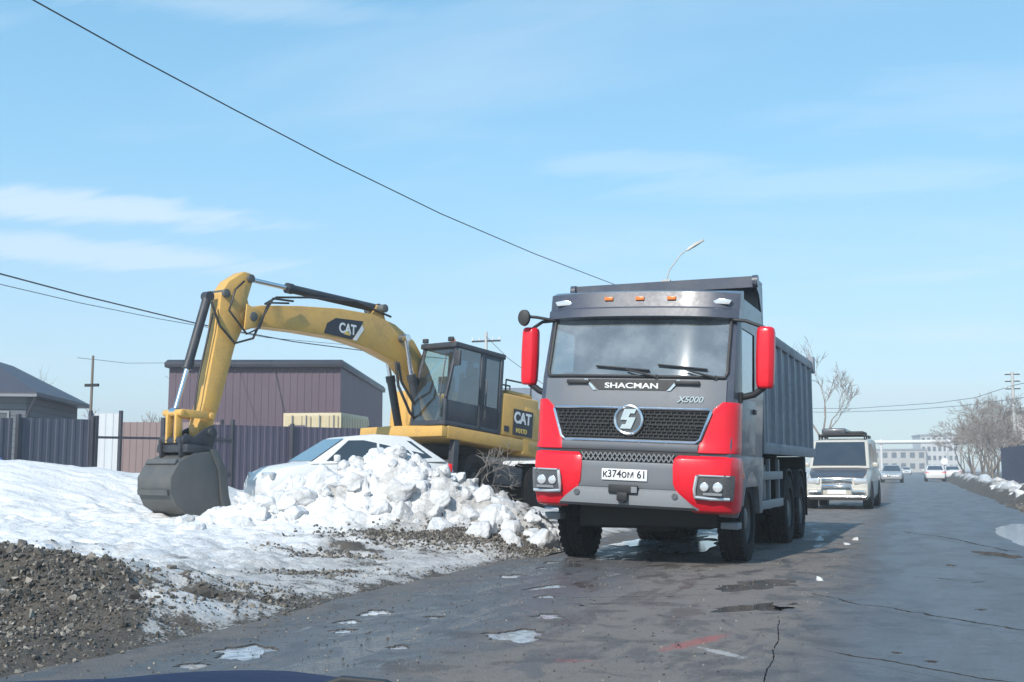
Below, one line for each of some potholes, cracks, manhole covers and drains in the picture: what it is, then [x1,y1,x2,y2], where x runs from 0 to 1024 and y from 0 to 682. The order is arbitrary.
pothole [704,578,812,594]
crack [899,531,1016,551]
crack [796,576,1024,682]
pothole [695,600,815,614]
